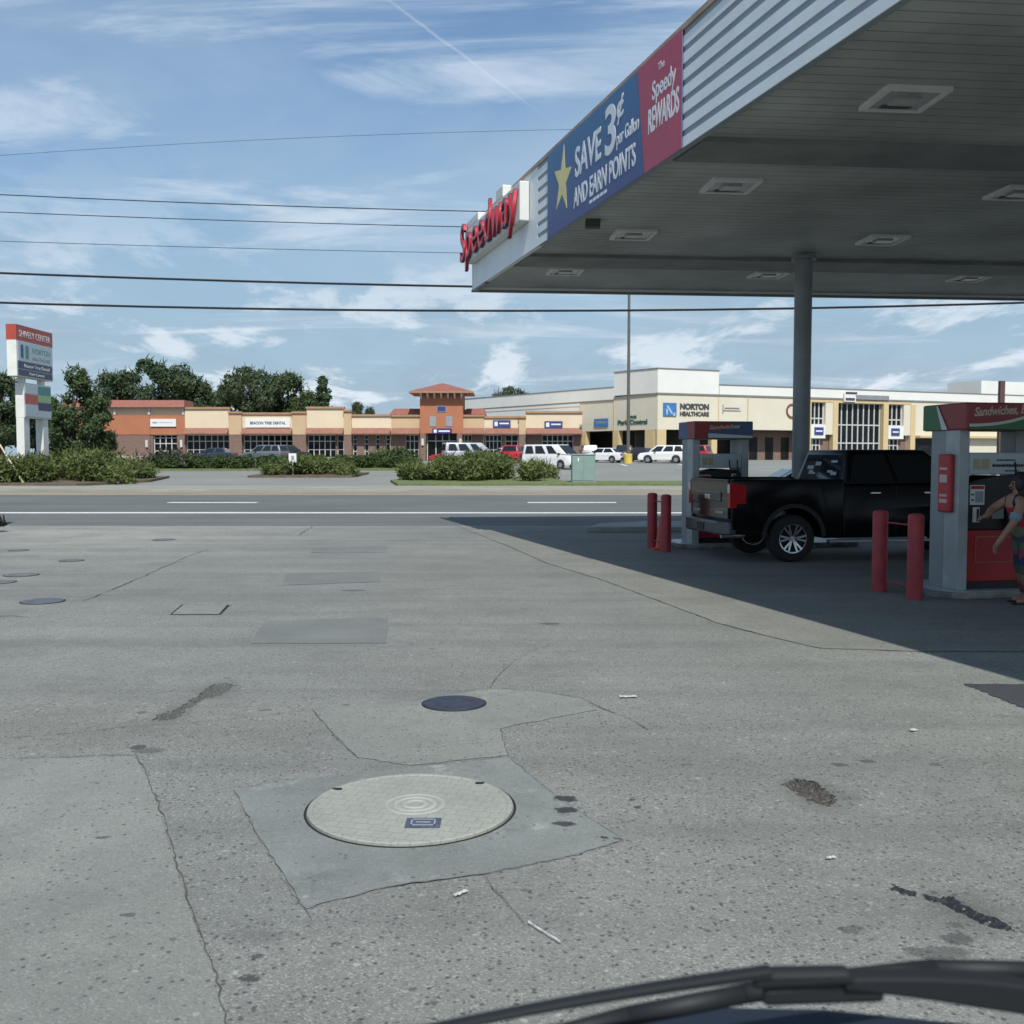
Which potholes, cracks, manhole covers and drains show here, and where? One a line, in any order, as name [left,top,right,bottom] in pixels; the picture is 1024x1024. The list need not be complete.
crack [234,789,311,918]
pothole [781,778,838,807]
utility cover [170,604,230,615]
manhole cover [304,774,516,848]
crack [88,527,312,599]
manhole cover [421,695,487,712]
